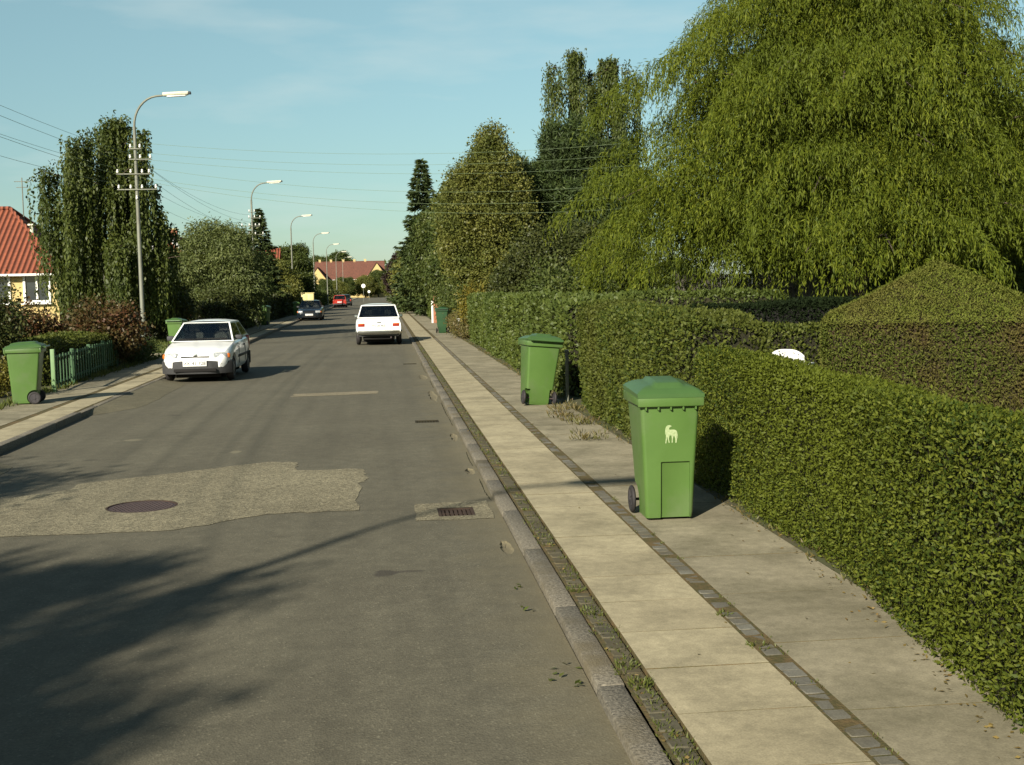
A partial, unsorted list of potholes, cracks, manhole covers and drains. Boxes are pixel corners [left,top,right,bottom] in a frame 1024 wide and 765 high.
manhole cover [105,500,178,513]
drain grate [437,507,475,516]
